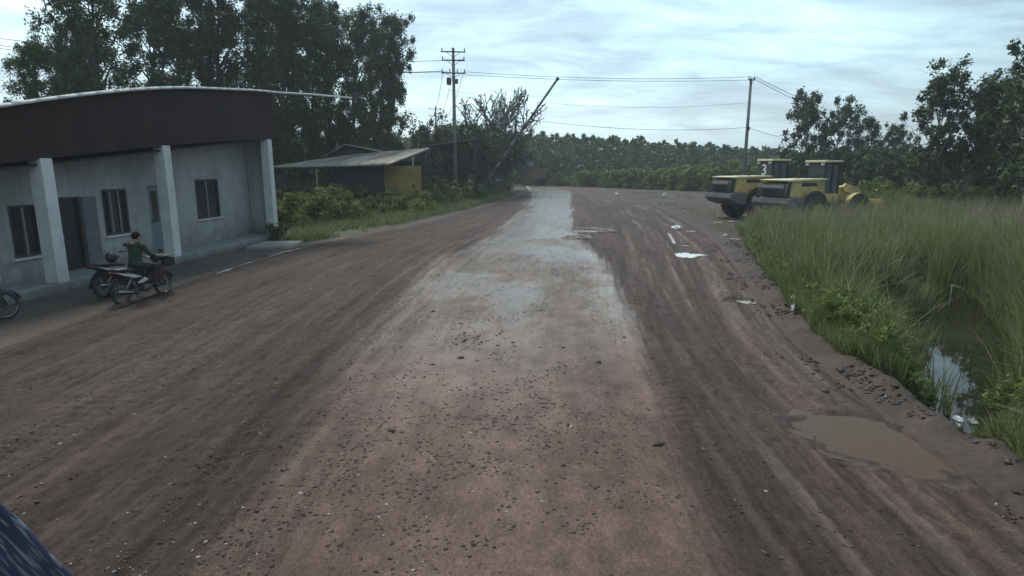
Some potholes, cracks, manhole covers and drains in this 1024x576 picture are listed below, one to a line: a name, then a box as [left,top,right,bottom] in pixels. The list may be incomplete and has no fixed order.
pothole [754,402,992,498]
